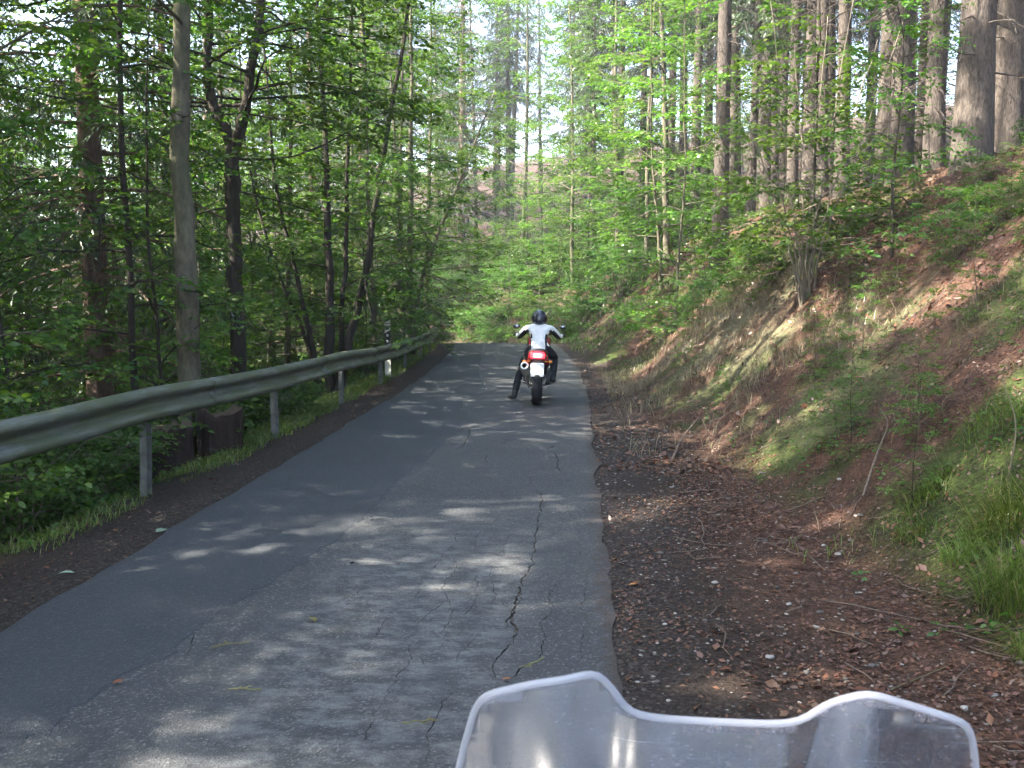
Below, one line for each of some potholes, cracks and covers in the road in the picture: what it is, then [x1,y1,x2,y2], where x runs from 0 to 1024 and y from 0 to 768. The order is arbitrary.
crack [361,477,544,762]
crack [540,583,559,656]
